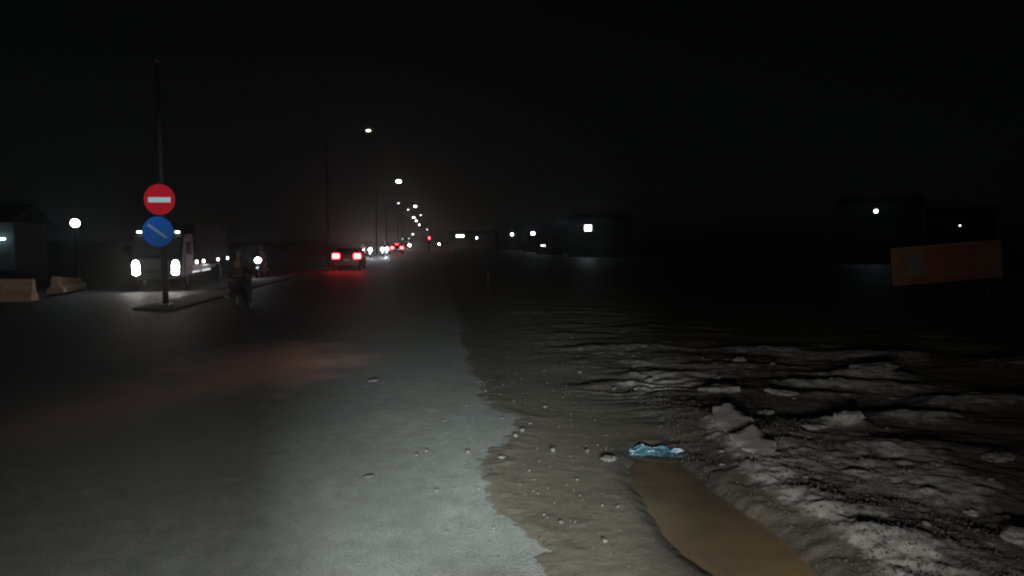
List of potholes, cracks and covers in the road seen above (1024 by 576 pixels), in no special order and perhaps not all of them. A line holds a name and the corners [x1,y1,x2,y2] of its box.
pothole [613,438,866,576]
